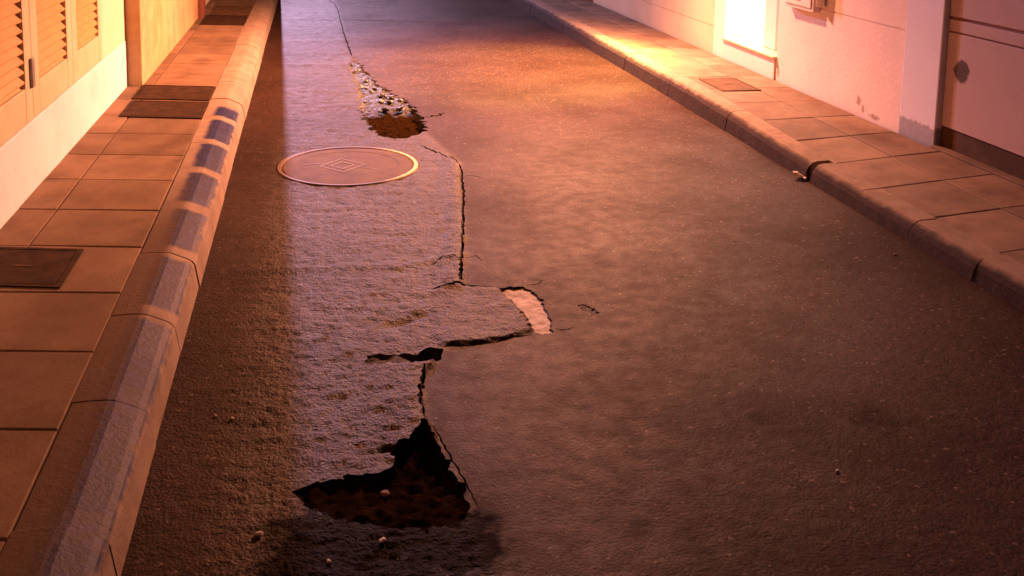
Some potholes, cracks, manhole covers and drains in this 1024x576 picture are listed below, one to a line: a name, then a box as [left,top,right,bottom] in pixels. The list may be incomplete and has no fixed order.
pothole [498,286,554,334]
crack [329,0,352,56]
pothole [291,418,470,529]
utility cover [699,78,761,92]
pothole [348,57,428,139]
manhole cover [276,146,418,187]
utility cover [0,247,83,289]
utility cover [119,100,209,120]
crack [417,363,479,508]
crack [419,145,541,290]
utility cover [131,85,215,101]
